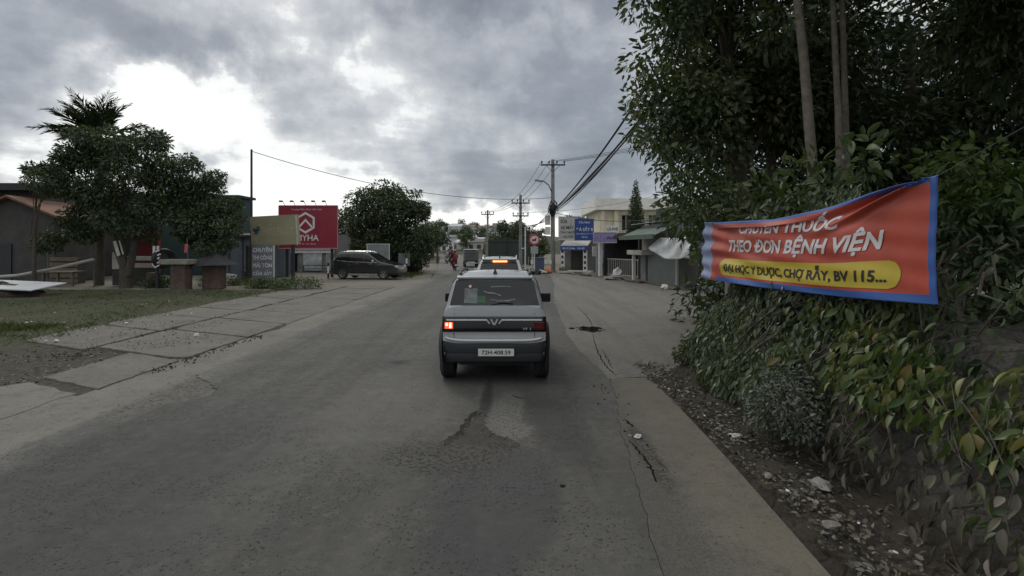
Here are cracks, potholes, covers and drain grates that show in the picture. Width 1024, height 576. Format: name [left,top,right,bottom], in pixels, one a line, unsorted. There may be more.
crack [579,309,649,378]
crack [624,419,668,482]
pothole [575,325,606,333]
